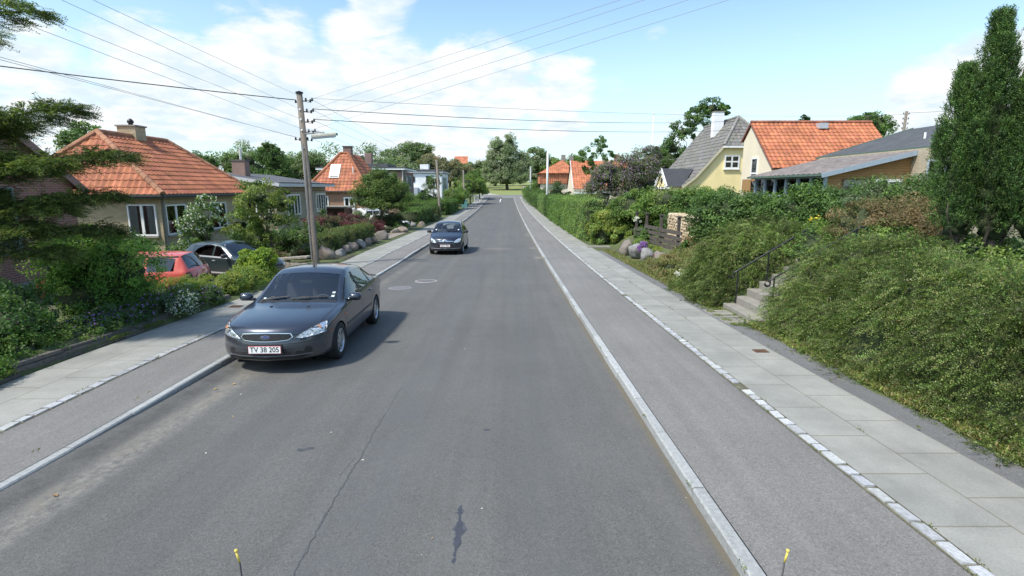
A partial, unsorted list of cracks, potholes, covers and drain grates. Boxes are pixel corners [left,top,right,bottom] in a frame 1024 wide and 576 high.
crack [294,382,405,576]
